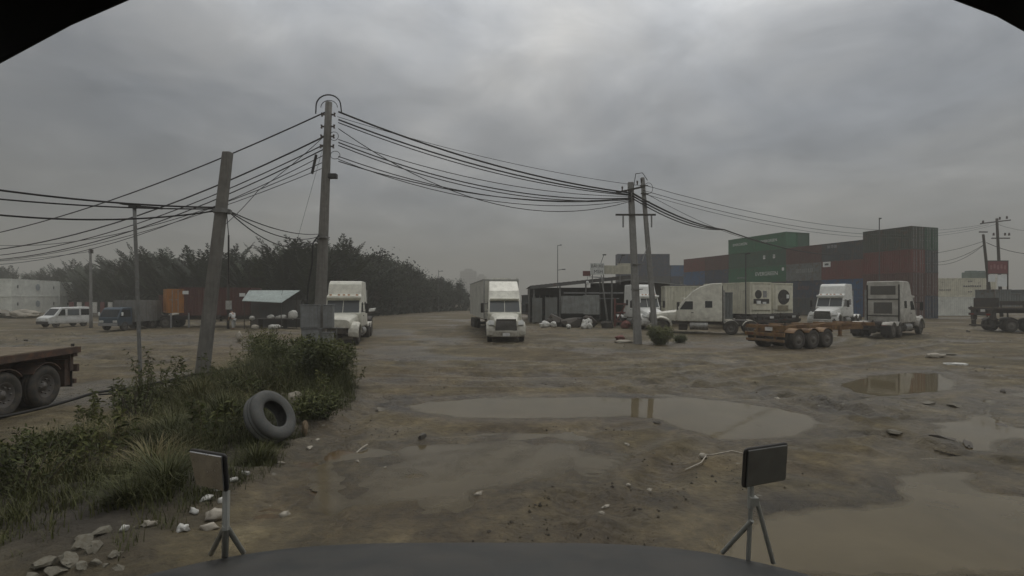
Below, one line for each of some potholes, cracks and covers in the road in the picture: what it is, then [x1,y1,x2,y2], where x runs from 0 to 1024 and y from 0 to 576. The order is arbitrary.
pothole [376,392,858,450]
pothole [819,369,987,399]
pothole [896,392,1024,457]
